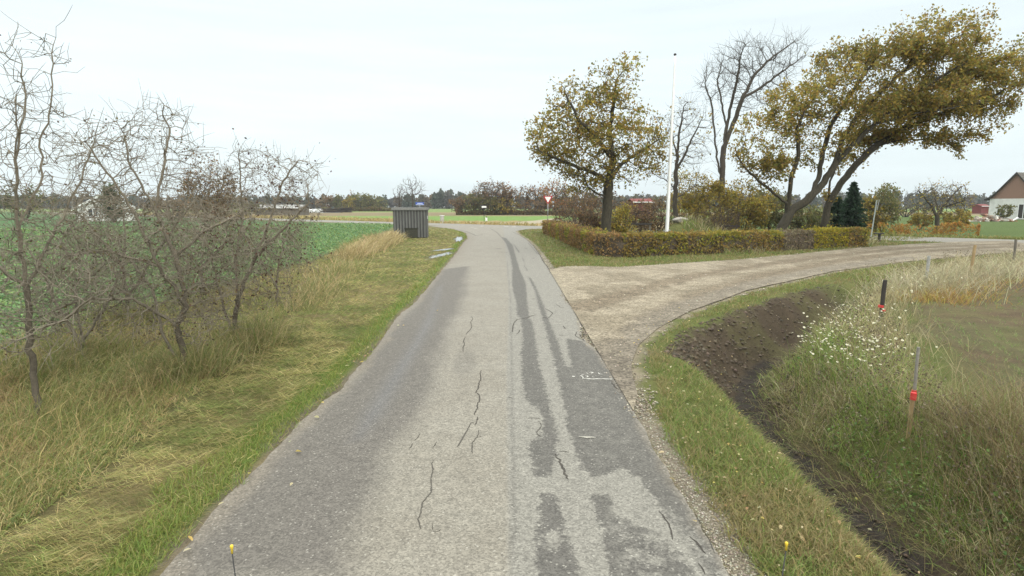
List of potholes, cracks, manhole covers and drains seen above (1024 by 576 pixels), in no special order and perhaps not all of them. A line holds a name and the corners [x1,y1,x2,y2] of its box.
crack [409,436,440,532]
crack [691,517,715,573]
crack [457,371,481,453]
